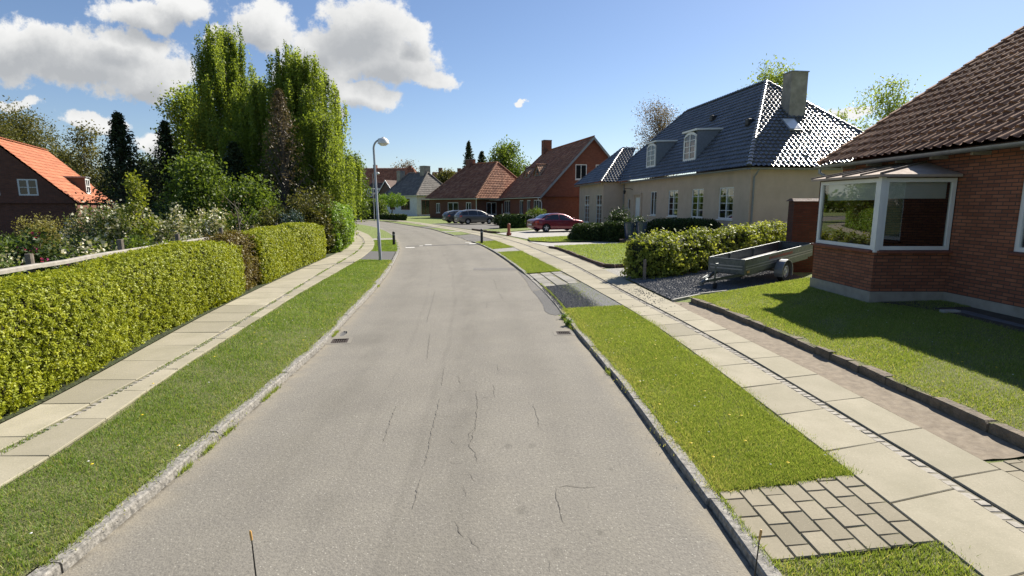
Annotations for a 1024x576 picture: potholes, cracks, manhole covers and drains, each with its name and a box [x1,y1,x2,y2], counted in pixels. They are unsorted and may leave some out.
crack [447,374,495,491]
